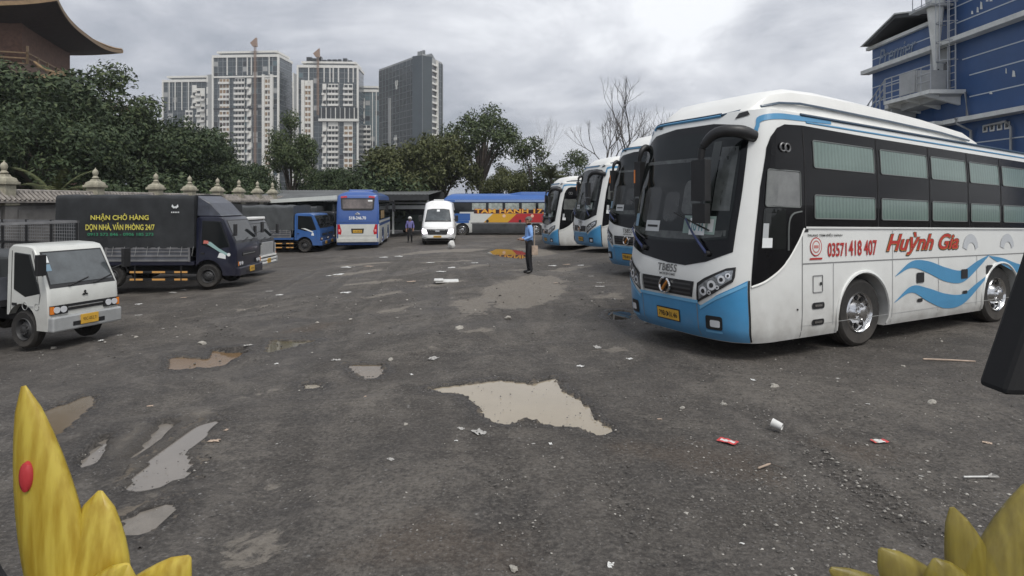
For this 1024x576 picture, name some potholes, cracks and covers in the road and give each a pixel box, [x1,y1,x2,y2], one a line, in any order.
pothole [600,309,638,322]
pothole [117,491,197,549]
pothole [484,248,526,259]
pothole [106,413,232,494]
pothole [415,374,629,439]
pothole [160,348,242,372]
pothole [42,389,107,435]
pothole [80,439,108,468]
pothole [339,361,392,381]
pothole [258,338,326,355]
